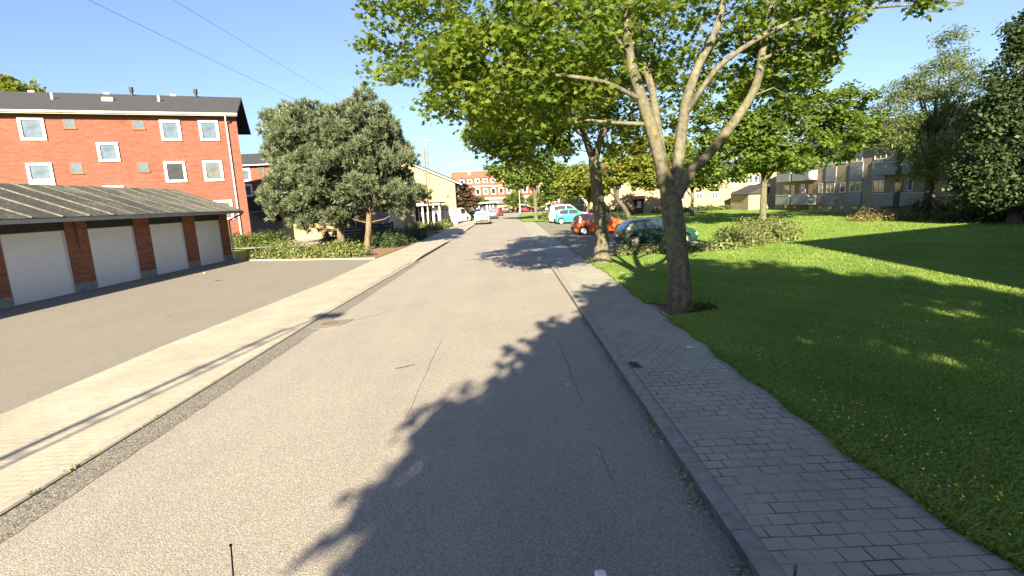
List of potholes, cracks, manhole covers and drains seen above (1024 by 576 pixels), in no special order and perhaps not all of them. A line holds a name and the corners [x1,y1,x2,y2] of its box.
manhole cover [308,319,353,329]
crack [557,338,584,403]
